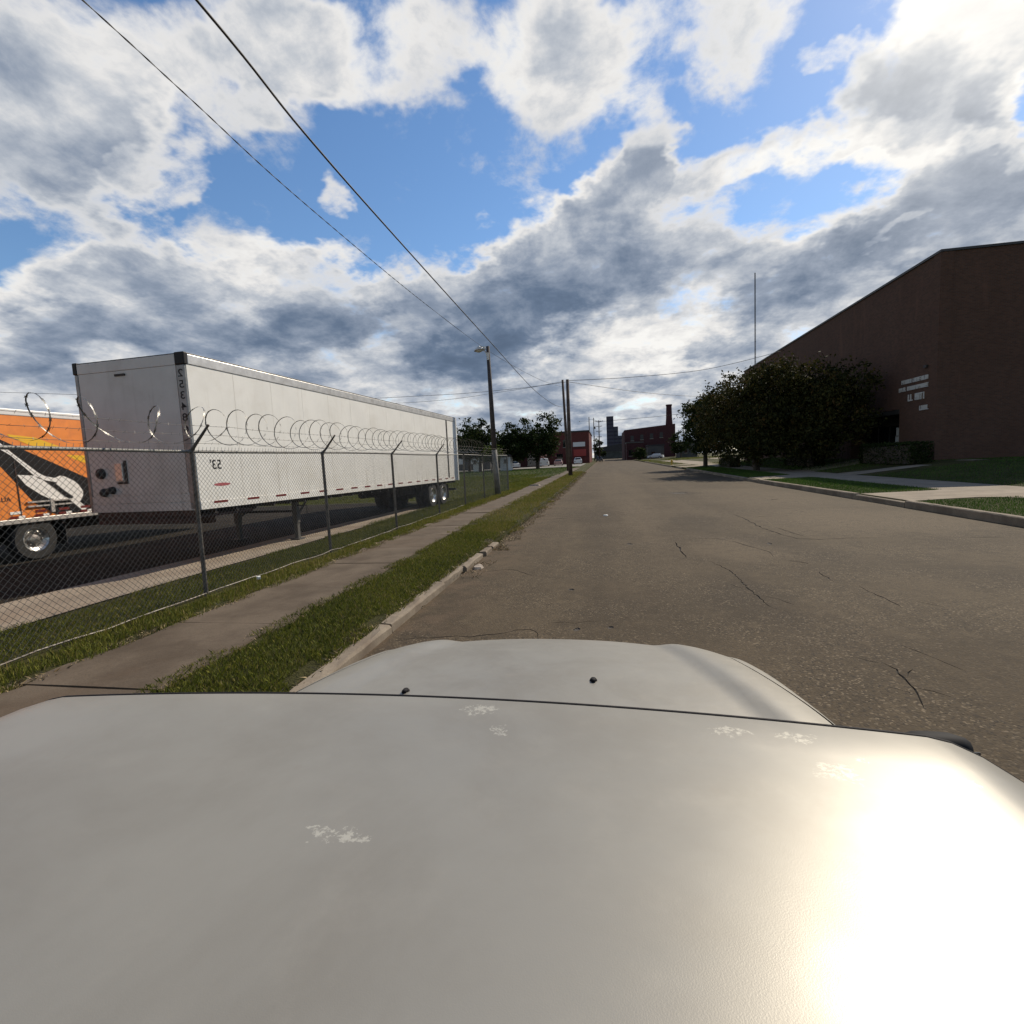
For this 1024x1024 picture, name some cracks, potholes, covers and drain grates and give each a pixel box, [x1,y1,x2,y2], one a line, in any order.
crack [863,646,960,707]
crack [397,621,587,641]
crack [710,561,796,615]
crack [675,538,834,582]
